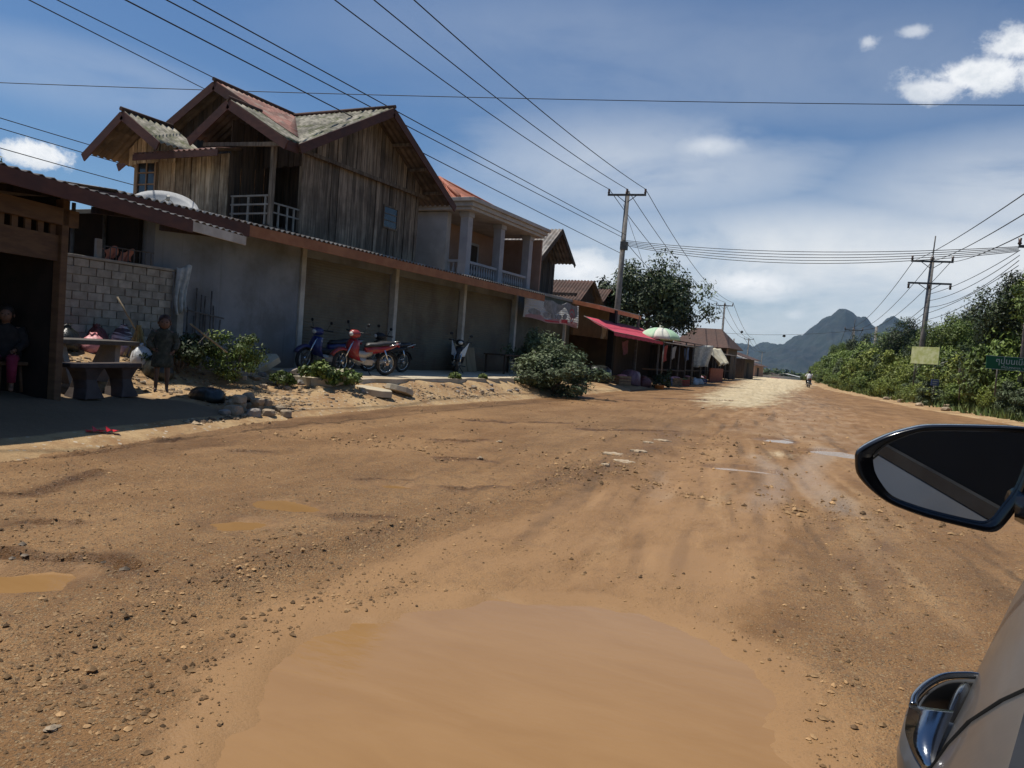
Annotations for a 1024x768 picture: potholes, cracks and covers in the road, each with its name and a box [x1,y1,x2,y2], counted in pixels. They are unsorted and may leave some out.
pothole [0,559,124,607]
pothole [798,448,856,459]
pothole [155,590,849,768]
pothole [227,493,355,519]
pothole [746,436,807,446]
pothole [175,510,301,537]
